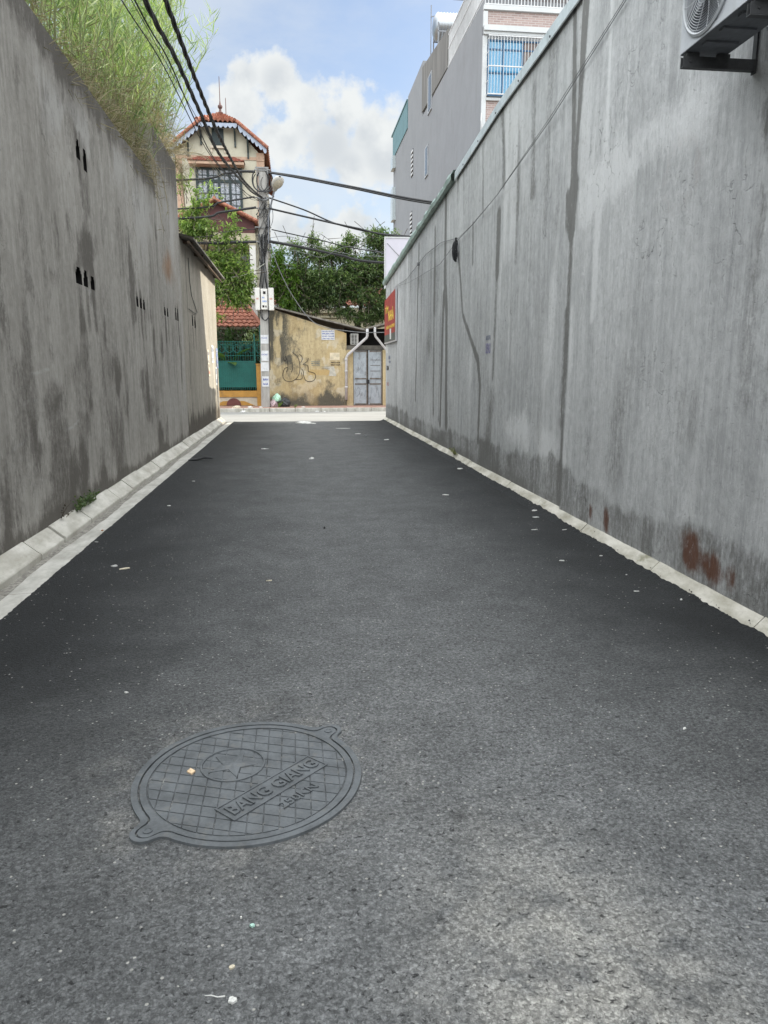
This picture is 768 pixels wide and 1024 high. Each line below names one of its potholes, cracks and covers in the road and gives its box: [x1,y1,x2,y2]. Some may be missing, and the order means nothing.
manhole cover [129,722,361,849]
